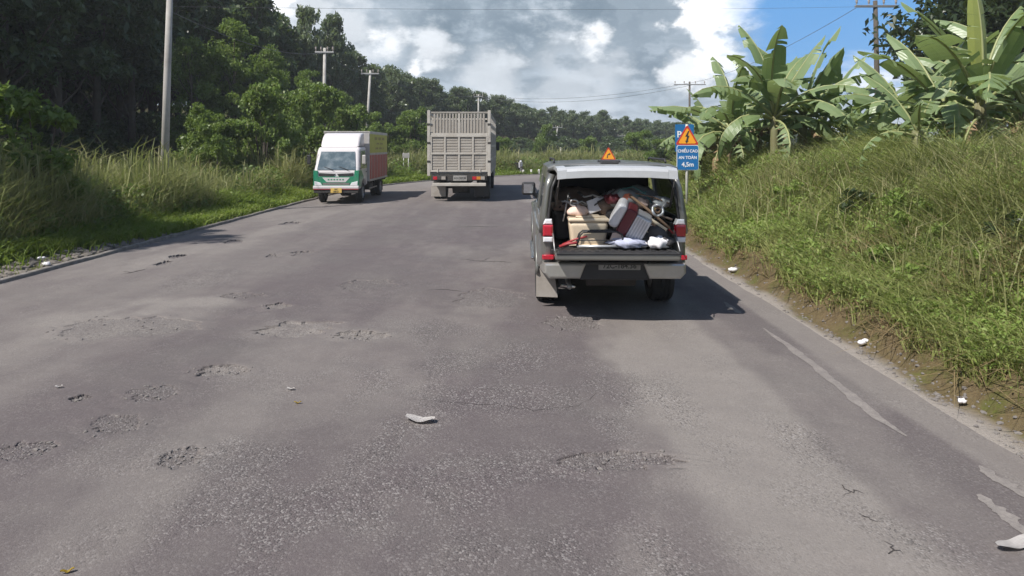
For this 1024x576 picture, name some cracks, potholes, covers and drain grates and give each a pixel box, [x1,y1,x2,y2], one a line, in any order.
pothole [529,313,617,336]
pothole [321,326,404,346]
pothole [179,359,267,383]
pothole [67,406,164,444]
pothole [239,318,359,342]
pothole [159,253,195,261]
pothole [40,312,217,345]
pothole [144,259,181,268]
pothole [109,379,199,409]
pothole [0,432,85,473]
